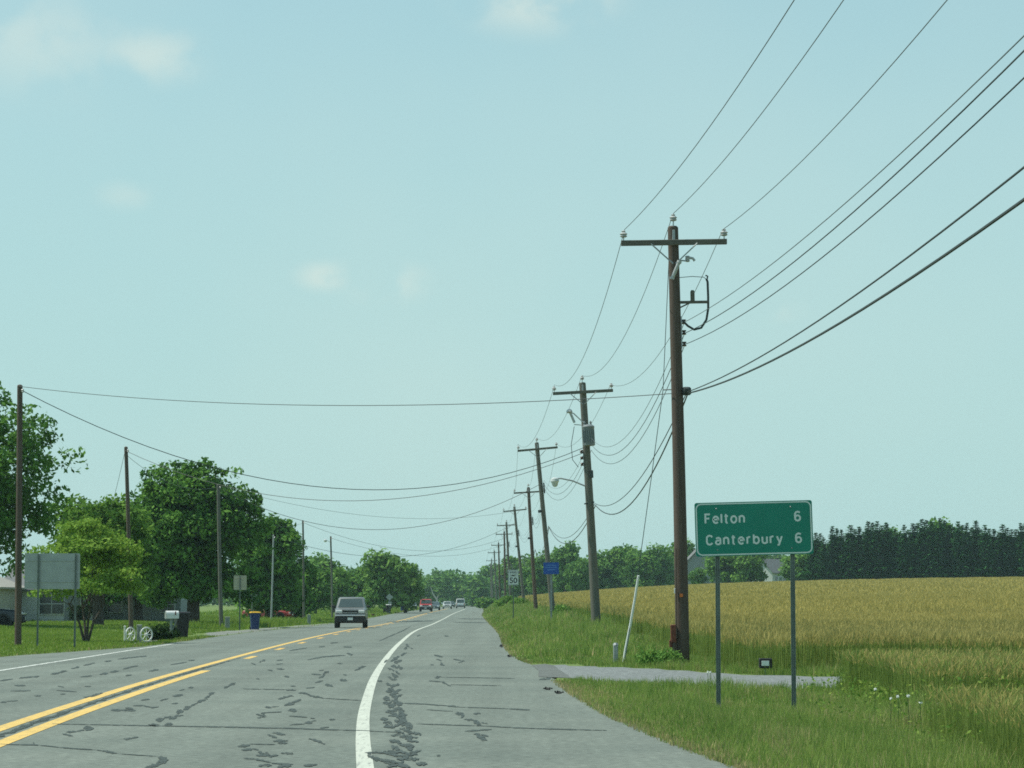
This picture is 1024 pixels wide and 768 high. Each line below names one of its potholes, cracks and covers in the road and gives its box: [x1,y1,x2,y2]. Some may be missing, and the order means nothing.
crack [0,618,594,768]
